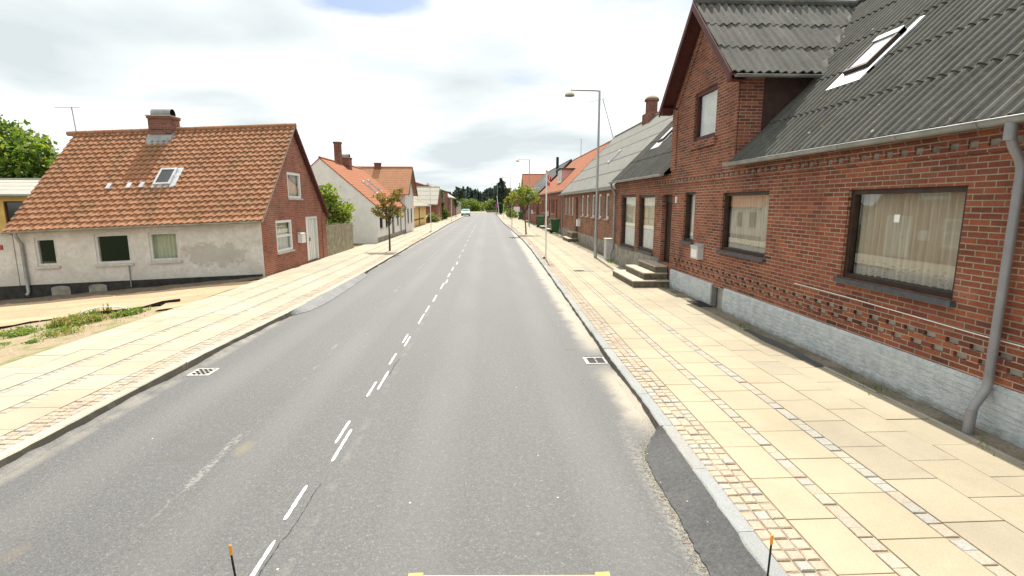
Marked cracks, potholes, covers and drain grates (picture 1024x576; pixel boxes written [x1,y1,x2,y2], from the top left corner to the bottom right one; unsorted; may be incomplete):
crack [258,484,321,576]
drain grate [186,368,220,376]
